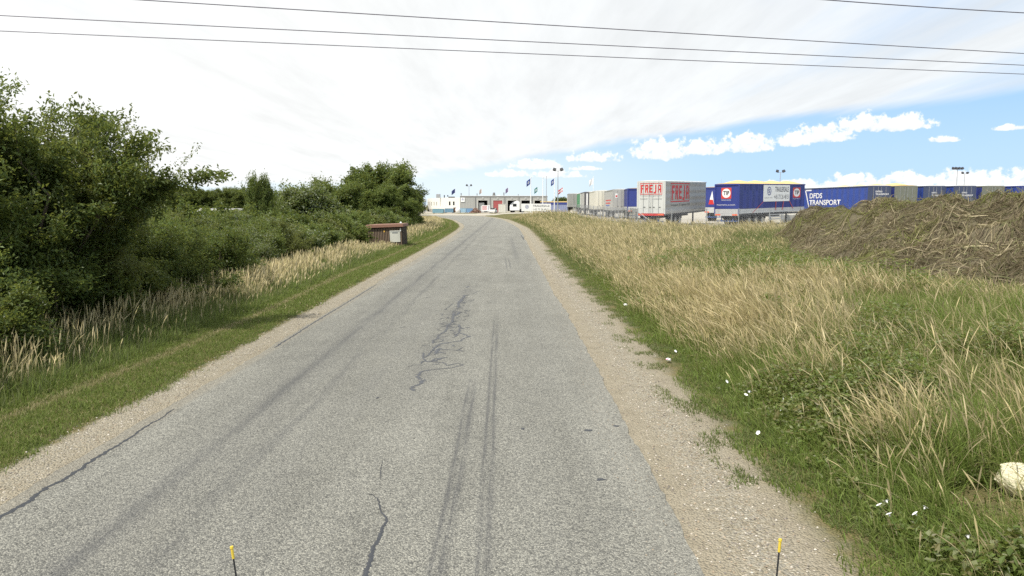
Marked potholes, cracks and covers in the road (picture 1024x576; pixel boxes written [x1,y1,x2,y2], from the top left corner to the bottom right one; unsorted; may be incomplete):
crack [409,286,476,391]
crack [362,460,388,576]
